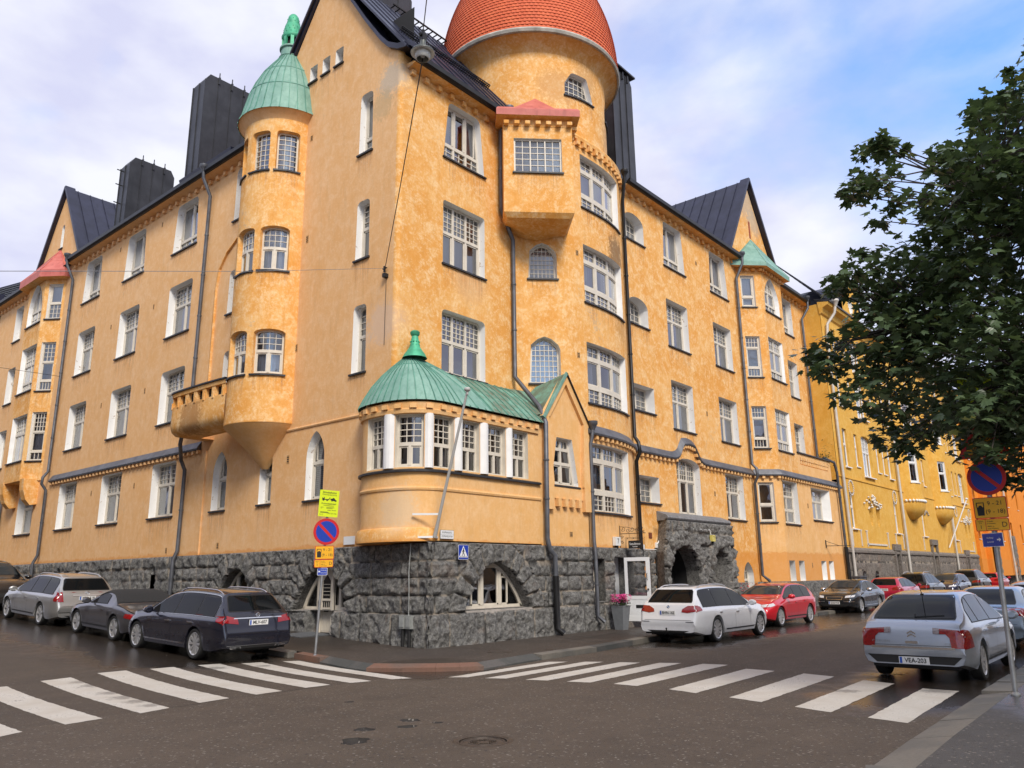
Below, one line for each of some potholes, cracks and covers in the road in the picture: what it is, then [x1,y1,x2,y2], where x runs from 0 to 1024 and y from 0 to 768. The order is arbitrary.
manhole cover [452,734,514,747]
